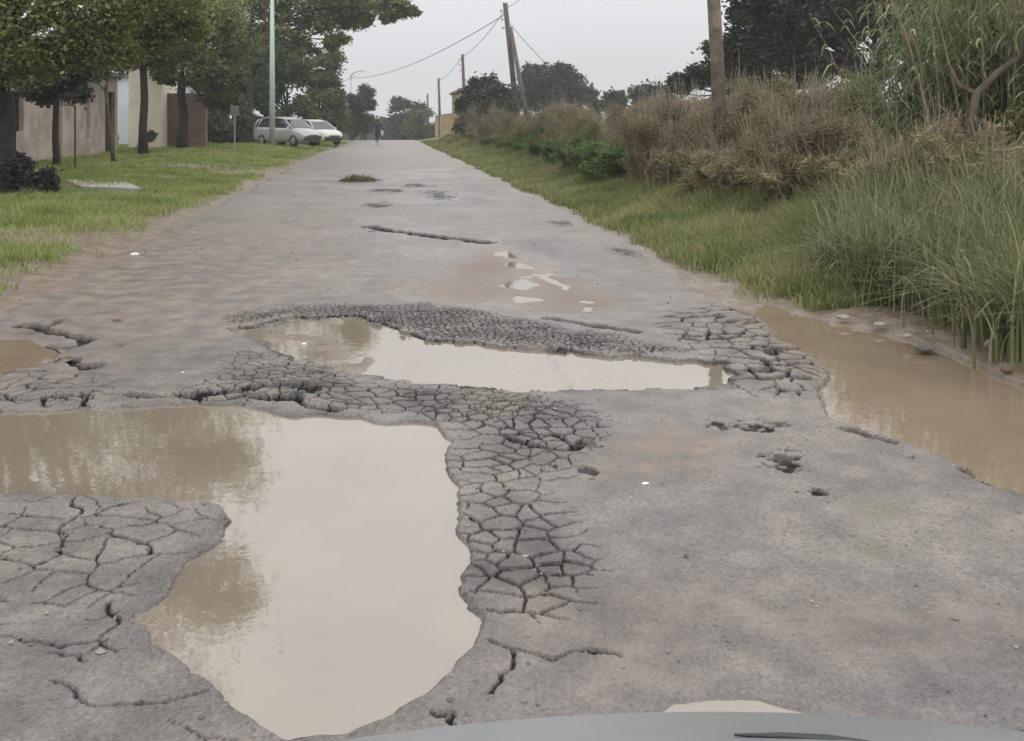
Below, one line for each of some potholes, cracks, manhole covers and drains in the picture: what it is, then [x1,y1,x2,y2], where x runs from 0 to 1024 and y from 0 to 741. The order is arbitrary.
crack [0,494,237,741]
pothole [763,306,1024,487]
crack [429,637,619,726]
pothole [794,487,836,499]
crack [0,318,611,624]
pothole [0,334,63,373]
crack [224,302,828,397]
pothole [0,401,483,705]
pothole [249,316,741,391]
pothole [723,416,791,433]
pothole [358,200,399,211]
pothole [705,418,740,431]
